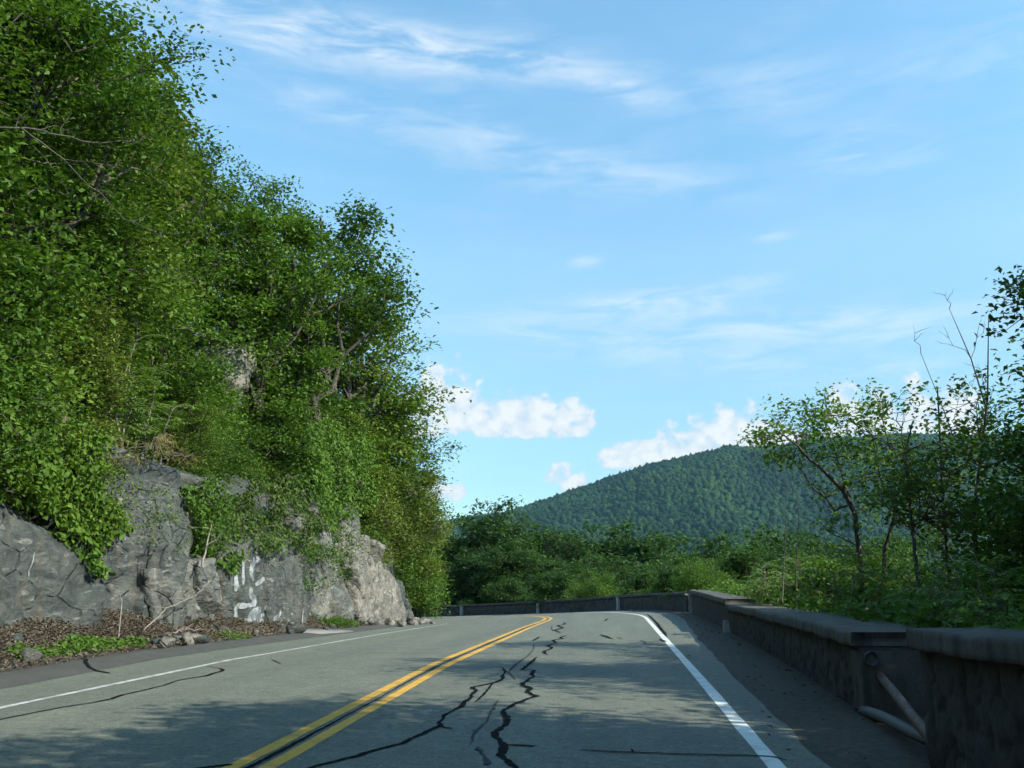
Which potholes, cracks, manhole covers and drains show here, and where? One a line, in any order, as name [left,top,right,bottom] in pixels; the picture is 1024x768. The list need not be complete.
crack [582,749,787,760]
crack [83,659,110,673]
crack [196,614,703,768]
crack [1,666,225,719]
